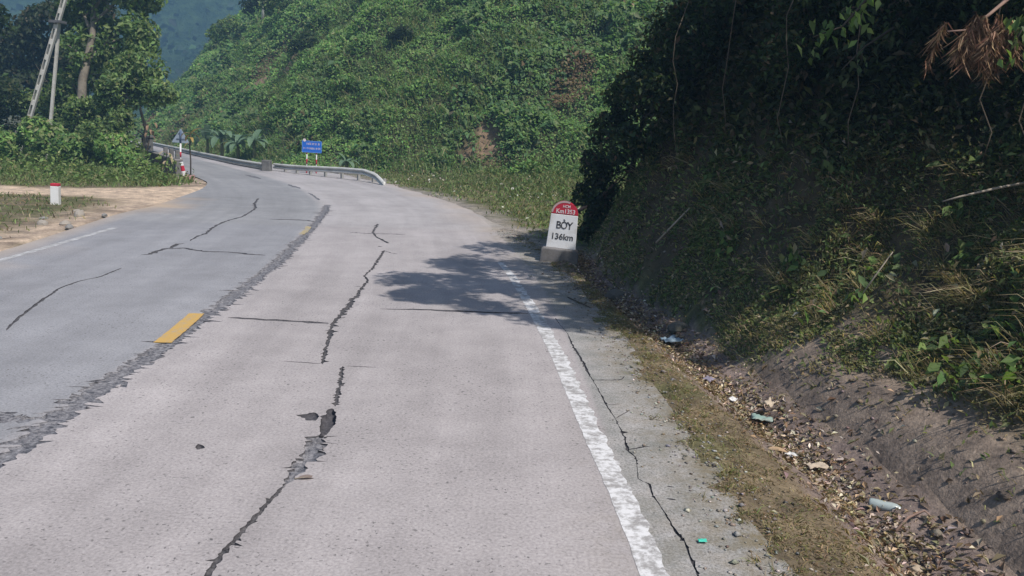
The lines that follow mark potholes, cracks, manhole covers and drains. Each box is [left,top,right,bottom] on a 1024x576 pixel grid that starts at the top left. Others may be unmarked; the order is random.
crack [555,318,700,576]
crack [0,184,528,576]
pothole [297,412,319,421]
pothole [319,408,337,438]
